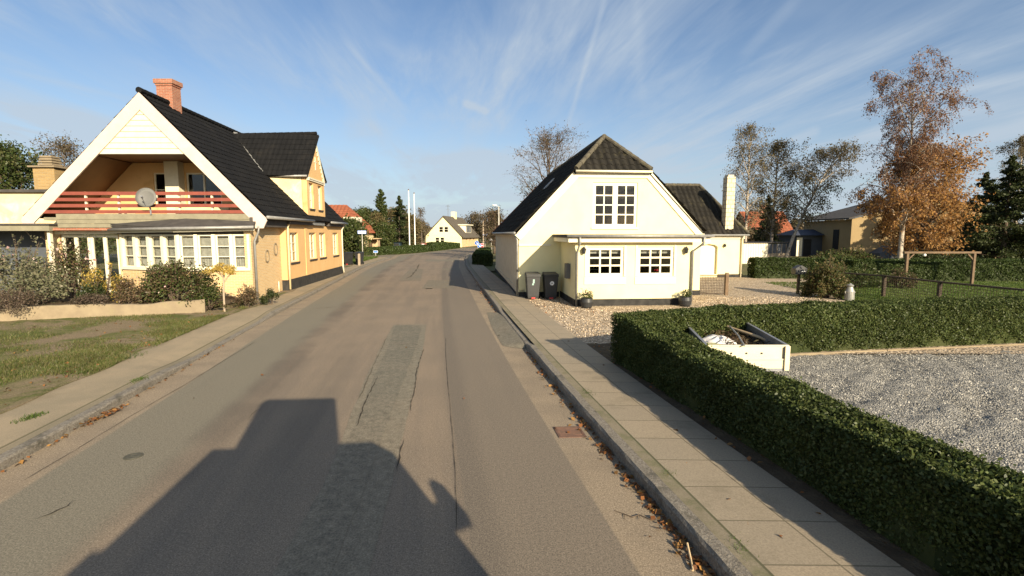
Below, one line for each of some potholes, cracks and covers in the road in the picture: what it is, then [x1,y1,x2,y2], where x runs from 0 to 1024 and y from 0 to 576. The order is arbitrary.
manhole cover [553,426,587,438]
crack [357,339,386,425]
